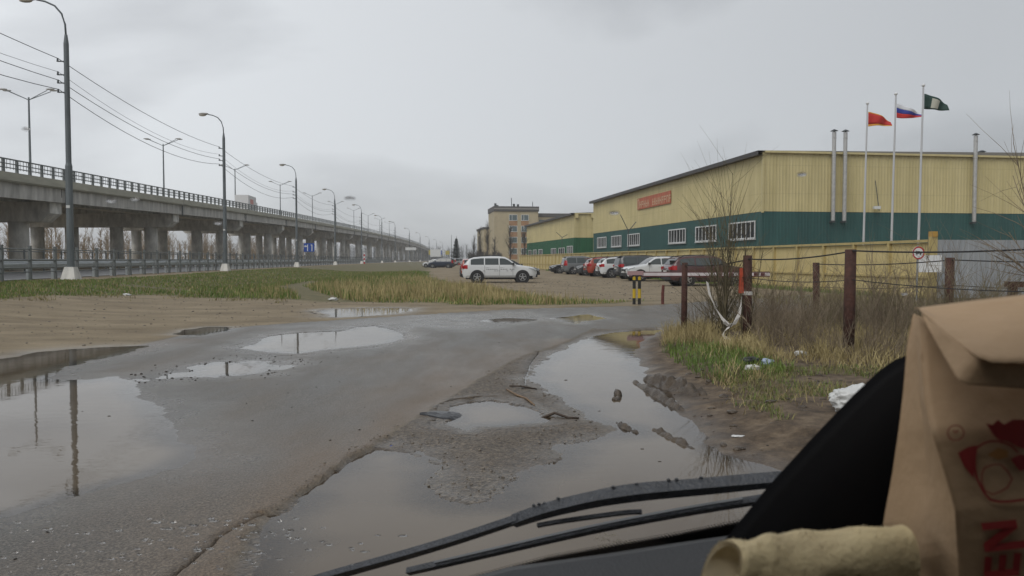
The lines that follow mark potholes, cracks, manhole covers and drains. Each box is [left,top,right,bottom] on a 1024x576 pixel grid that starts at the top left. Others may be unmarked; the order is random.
pothole [417,394,580,436]
